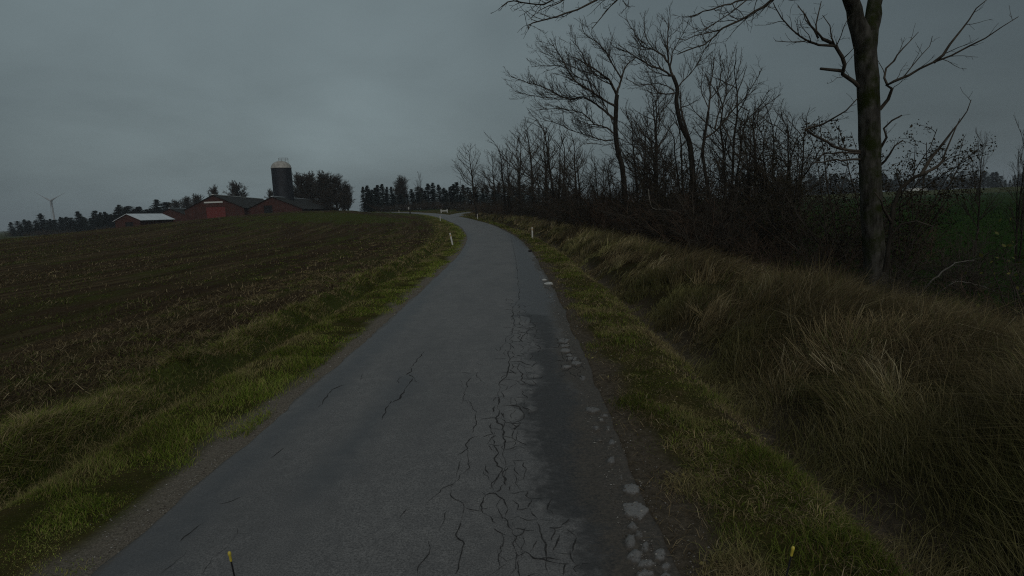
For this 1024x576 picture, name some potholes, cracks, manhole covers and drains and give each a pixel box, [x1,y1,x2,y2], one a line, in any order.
crack [417,245,587,576]
